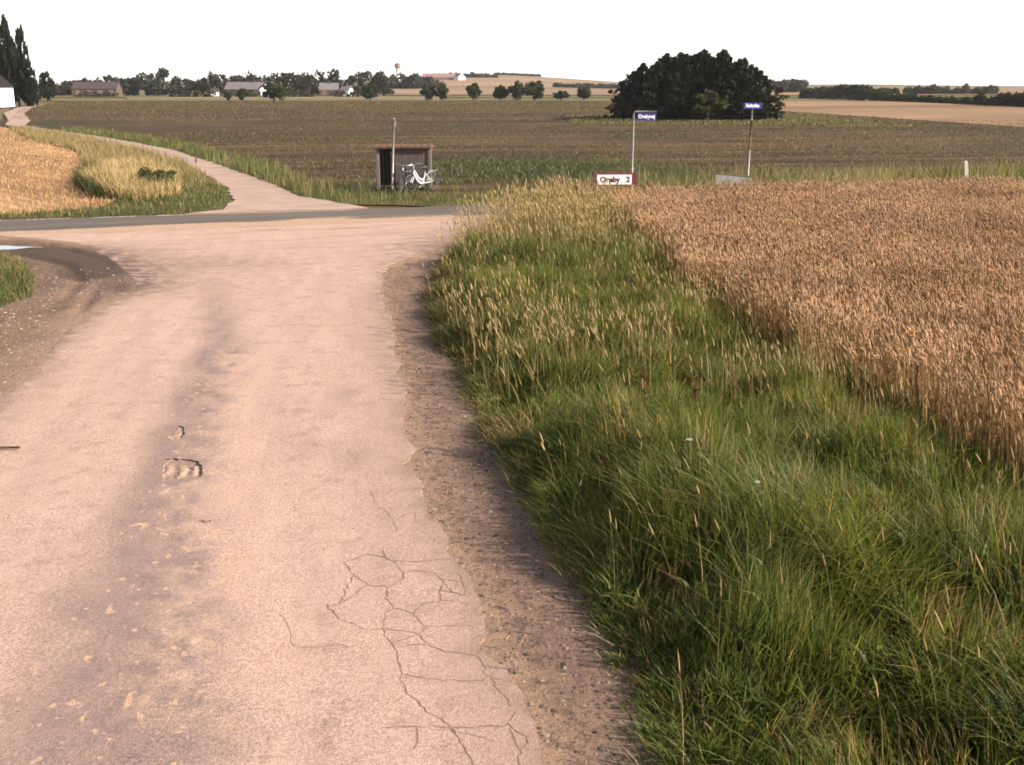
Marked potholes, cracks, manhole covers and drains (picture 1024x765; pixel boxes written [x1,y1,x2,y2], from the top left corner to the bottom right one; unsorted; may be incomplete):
pothole [173,425,185,439]
pothole [160,458,203,482]
crack [280,614,354,648]
crack [370,491,419,532]
crack [326,550,527,765]
